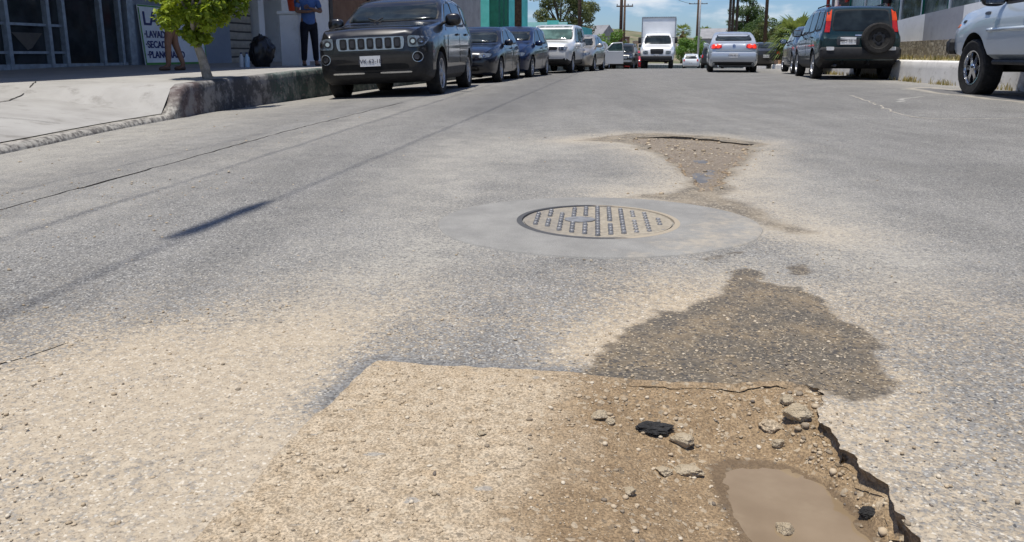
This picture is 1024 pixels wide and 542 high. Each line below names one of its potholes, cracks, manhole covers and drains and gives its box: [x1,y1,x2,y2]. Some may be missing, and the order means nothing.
pothole [193,360,921,542]
crack [0,102,403,210]
crack [850,95,1000,119]
pothole [632,136,754,192]
manhole cover [438,197,763,259]
